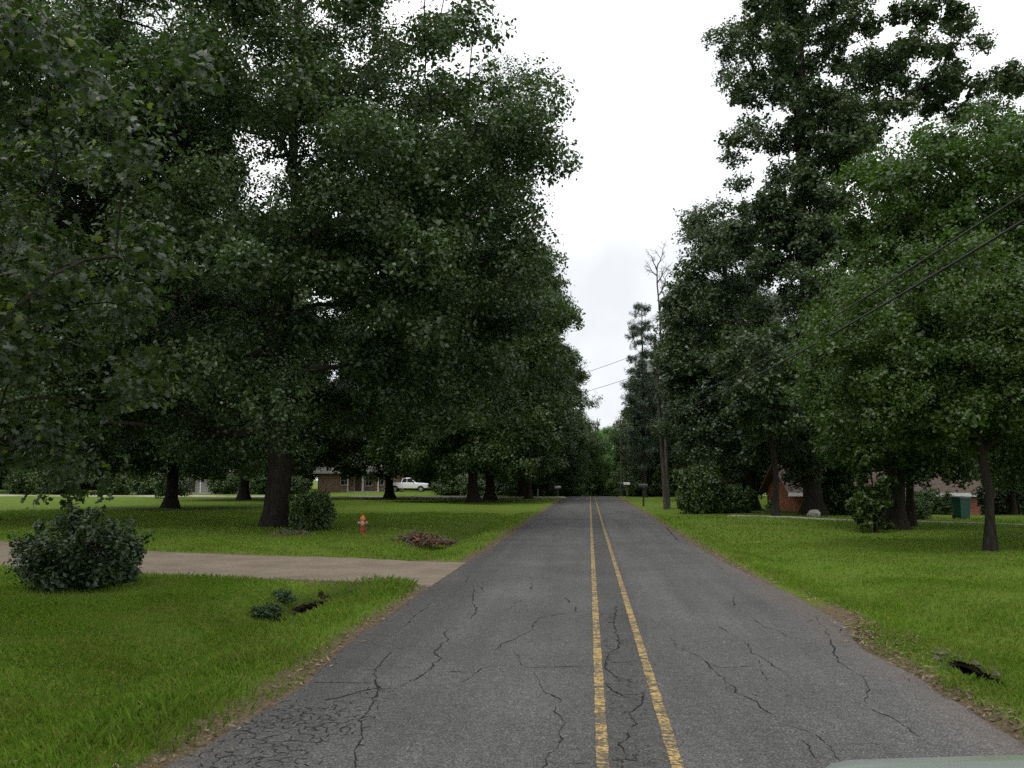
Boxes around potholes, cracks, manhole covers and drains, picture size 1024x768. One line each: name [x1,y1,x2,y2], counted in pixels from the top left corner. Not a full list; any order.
crack [199,597,670,768]
crack [816,617,919,748]
crack [669,636,841,761]
